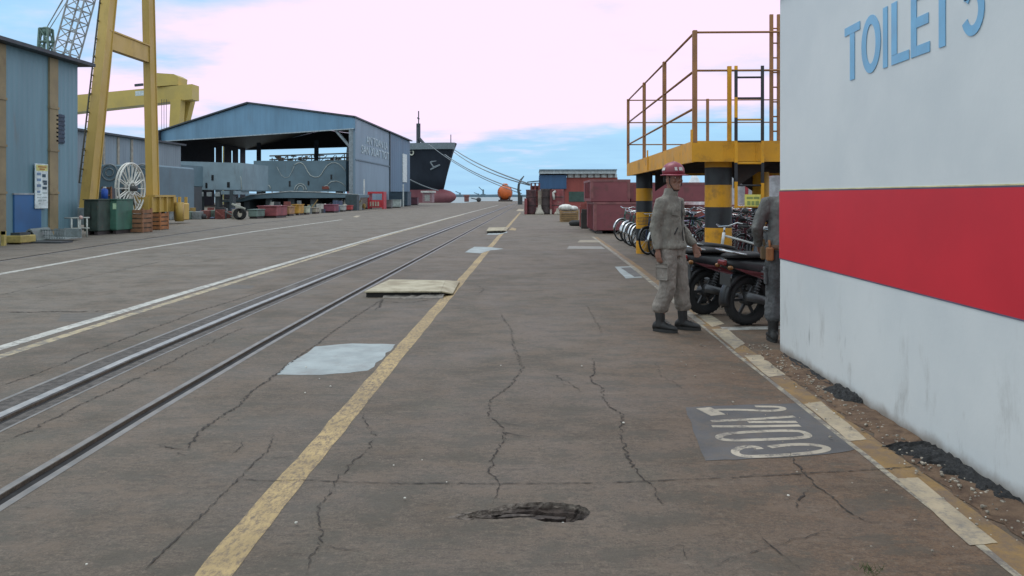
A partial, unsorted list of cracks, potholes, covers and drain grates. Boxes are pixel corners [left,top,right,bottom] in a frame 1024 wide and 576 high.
crack [718,454,872,567]
crack [487,315,531,504]
crack [142,436,278,571]
crack [307,413,376,572]
pothole [449,502,590,523]
crack [553,363,663,504]
